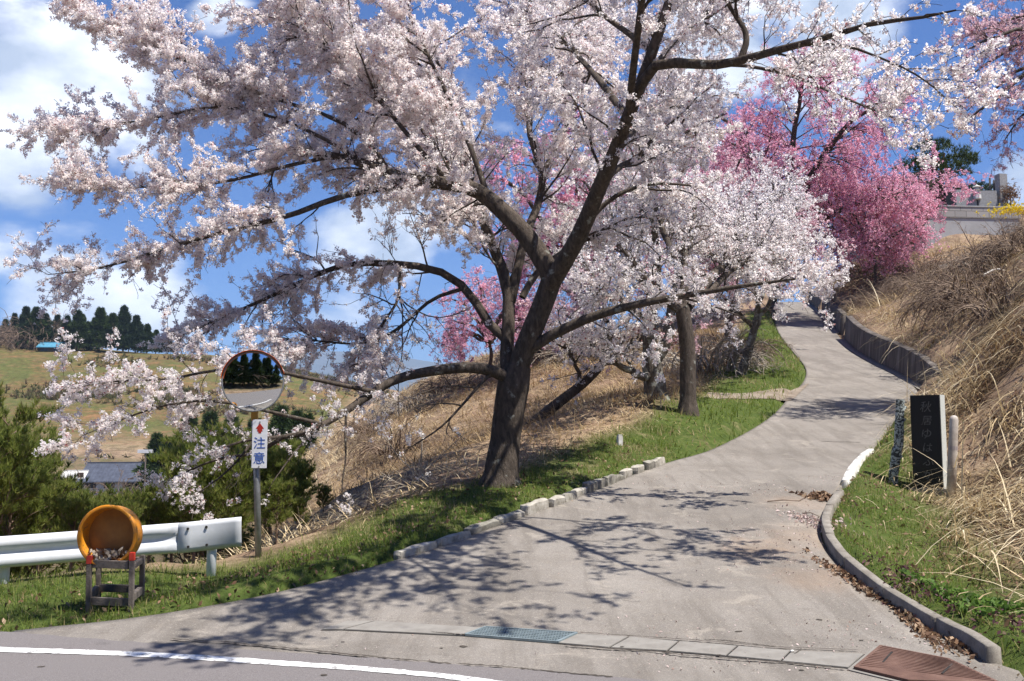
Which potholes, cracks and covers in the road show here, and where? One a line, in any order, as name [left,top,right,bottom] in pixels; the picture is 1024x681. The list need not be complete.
manhole cover [848,645,997,681]
drain grate [464,626,578,644]
